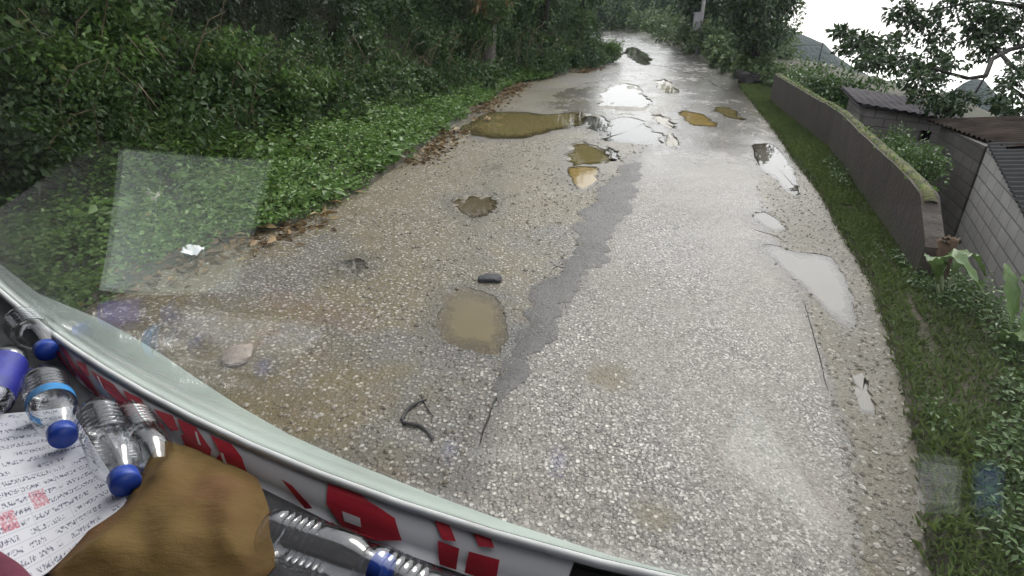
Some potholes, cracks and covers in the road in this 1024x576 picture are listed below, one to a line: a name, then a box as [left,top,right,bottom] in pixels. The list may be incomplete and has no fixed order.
pothole [605,147,620,161]
crack [802,299,829,392]
pothole [622,47,653,65]
pothole [652,79,679,94]
crack [479,383,497,446]
pothole [436,286,509,356]
pothole [564,141,617,166]
pothole [751,143,801,196]
pothole [460,111,587,139]
pothole [677,110,718,127]
pothole [713,106,746,120]
pothole [754,212,786,231]
